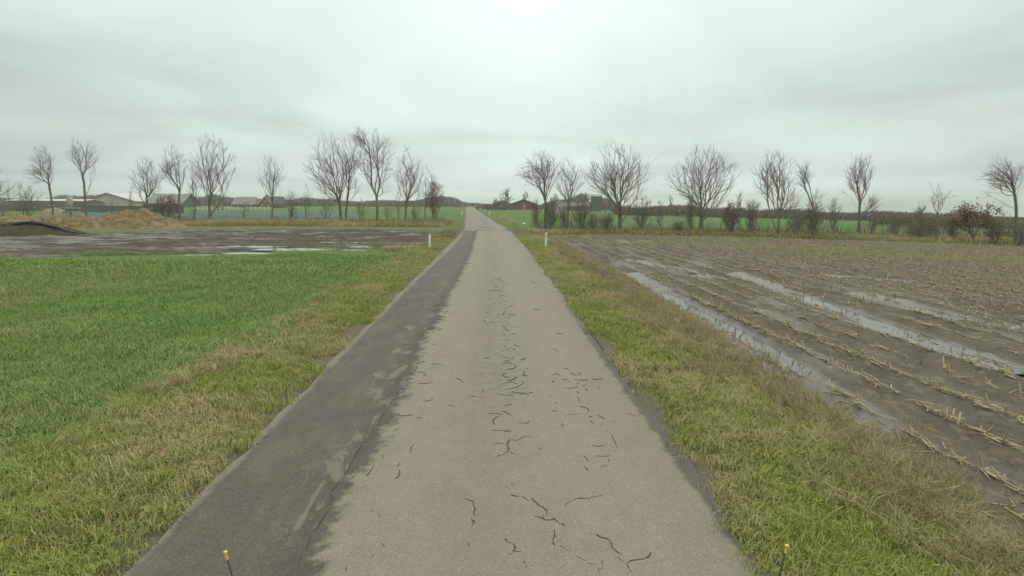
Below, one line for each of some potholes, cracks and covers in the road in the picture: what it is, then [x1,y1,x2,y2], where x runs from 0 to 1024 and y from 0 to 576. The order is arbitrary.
crack [364,265,543,479]
crack [511,483,651,575]
crack [534,309,635,471]
